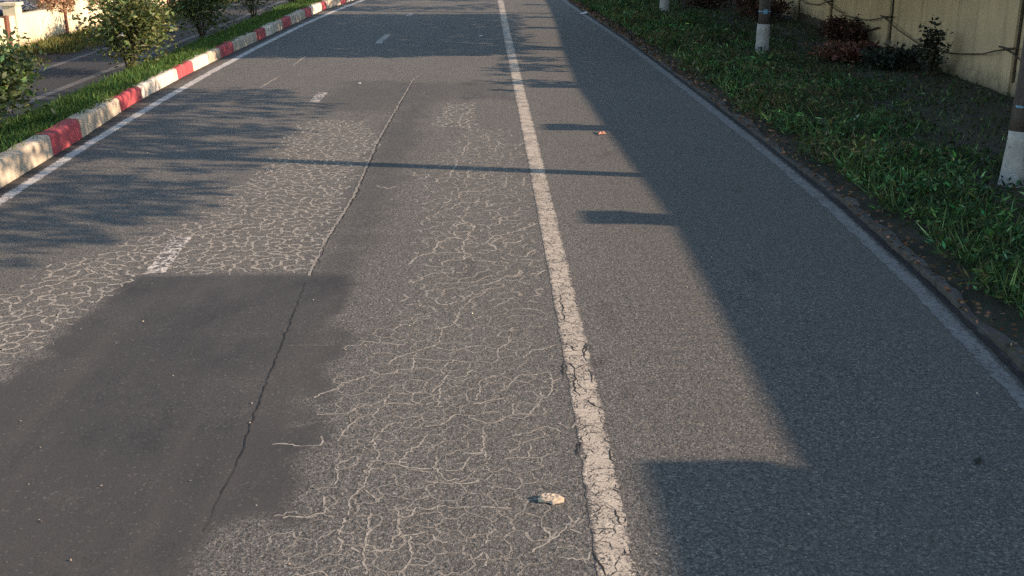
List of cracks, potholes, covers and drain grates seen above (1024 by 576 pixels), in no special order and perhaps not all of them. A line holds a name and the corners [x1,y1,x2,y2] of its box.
crack [0,120,380,370]
crack [256,128,632,576]
